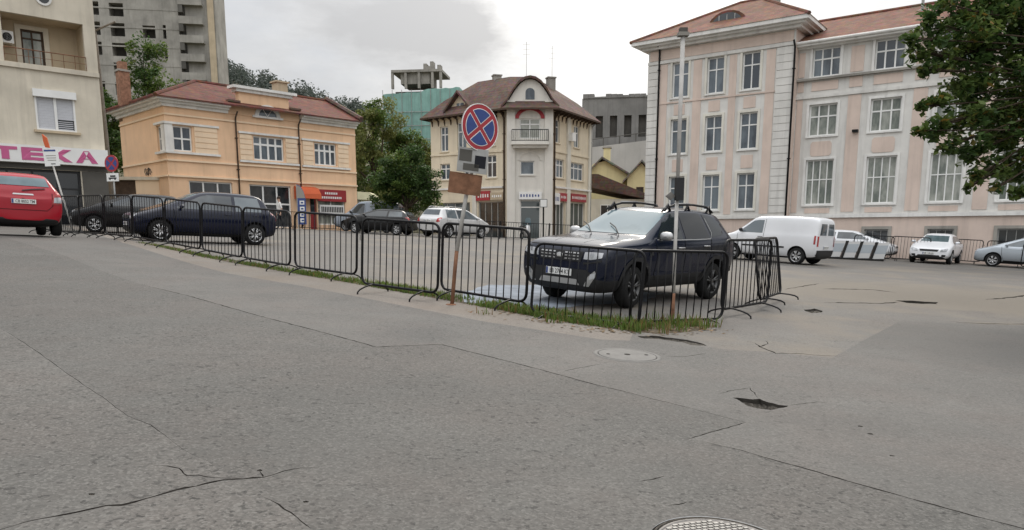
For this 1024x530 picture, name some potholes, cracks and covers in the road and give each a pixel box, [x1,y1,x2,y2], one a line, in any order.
manhole cover [652,517,763,530]
manhole cover [593,348,662,363]
crack [0,465,315,530]
pothole [735,398,787,410]
pothole [638,336,706,346]
